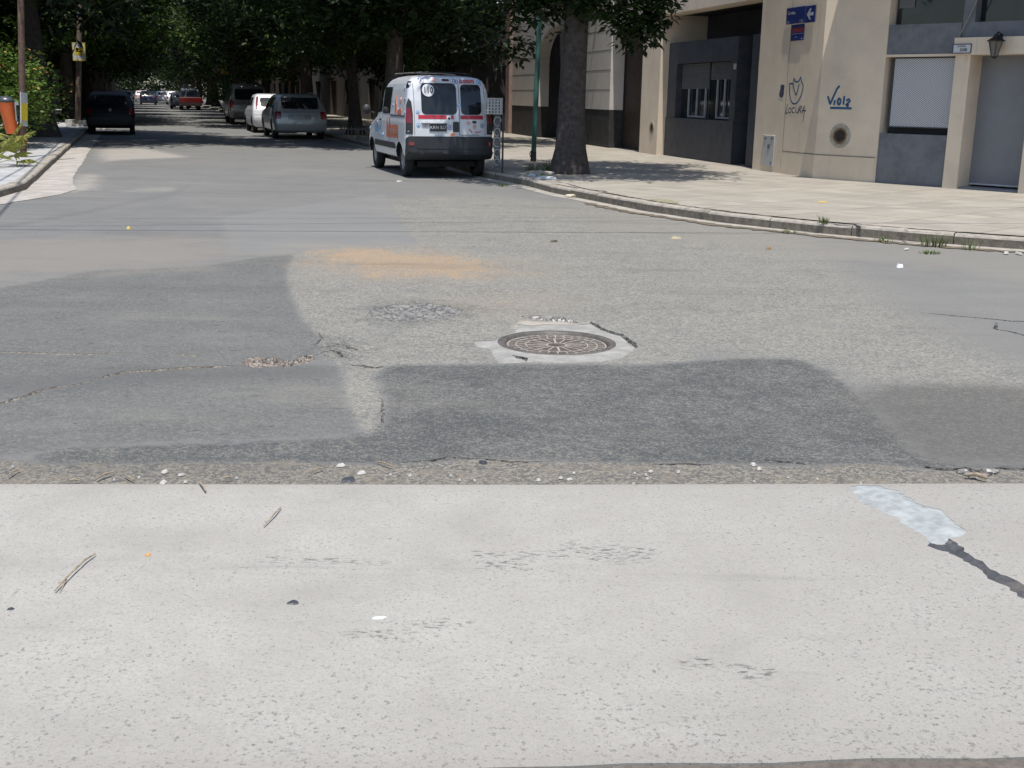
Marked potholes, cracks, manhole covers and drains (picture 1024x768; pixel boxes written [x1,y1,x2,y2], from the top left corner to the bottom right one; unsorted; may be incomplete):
crack [316,333,381,369]
crack [0,352,239,404]
manhole cover [474,324,635,363]
pothole [242,355,316,368]
crack [920,312,1024,336]
crack [377,398,385,429]
